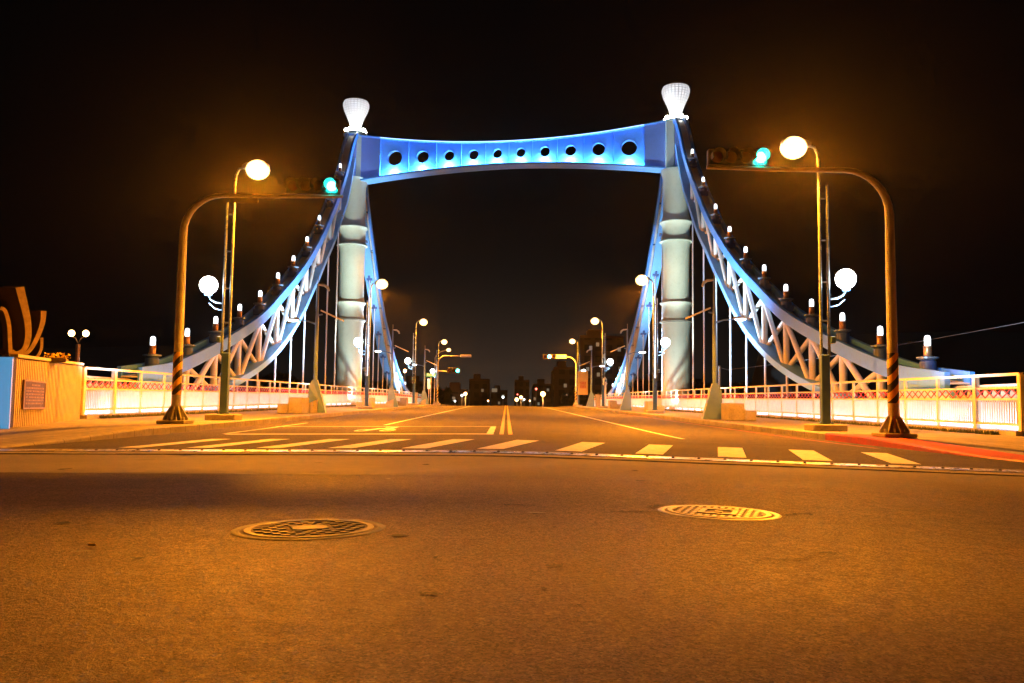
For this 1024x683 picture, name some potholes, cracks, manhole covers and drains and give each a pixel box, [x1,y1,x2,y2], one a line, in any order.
manhole cover [657,505,782,521]
manhole cover [230,518,386,541]
